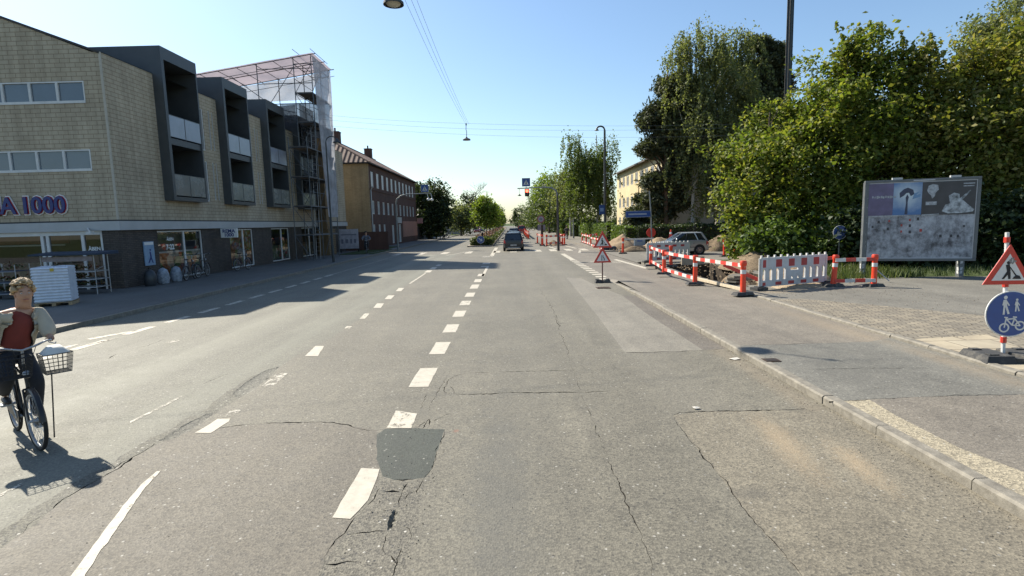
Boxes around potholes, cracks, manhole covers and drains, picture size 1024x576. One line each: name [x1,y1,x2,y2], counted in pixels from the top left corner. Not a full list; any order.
crack [321,482,422,575]
crack [191,422,377,431]
crack [418,292,653,575]
